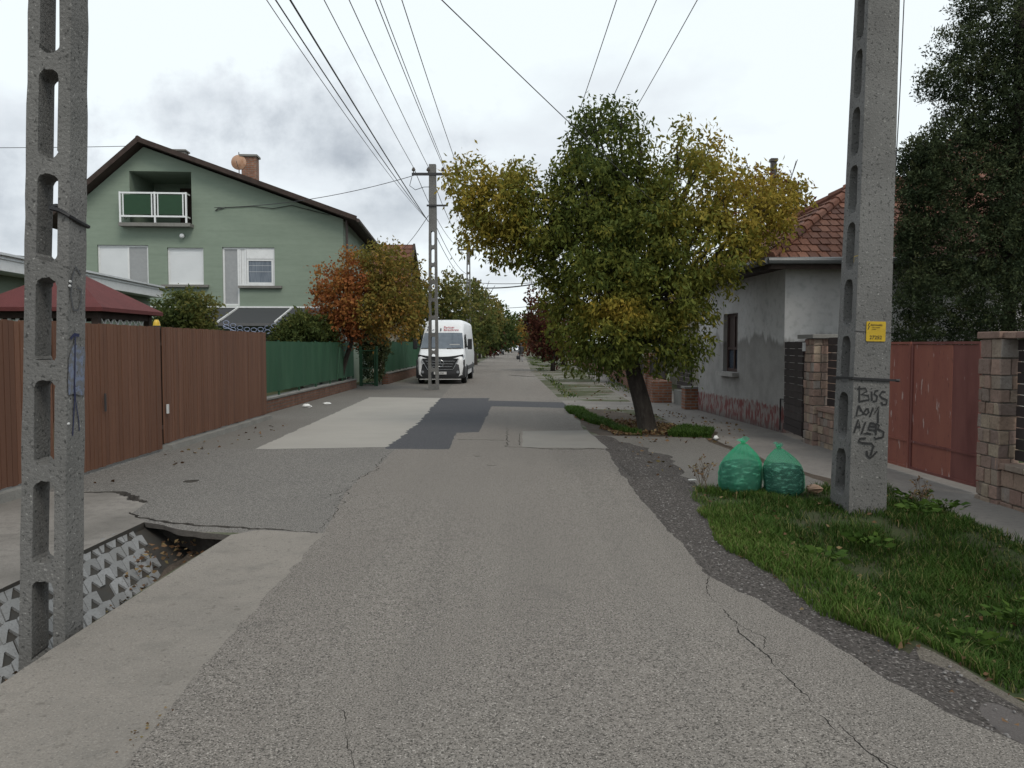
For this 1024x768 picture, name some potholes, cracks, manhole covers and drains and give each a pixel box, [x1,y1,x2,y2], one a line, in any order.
crack [706,579,898,768]
crack [84,491,317,533]
